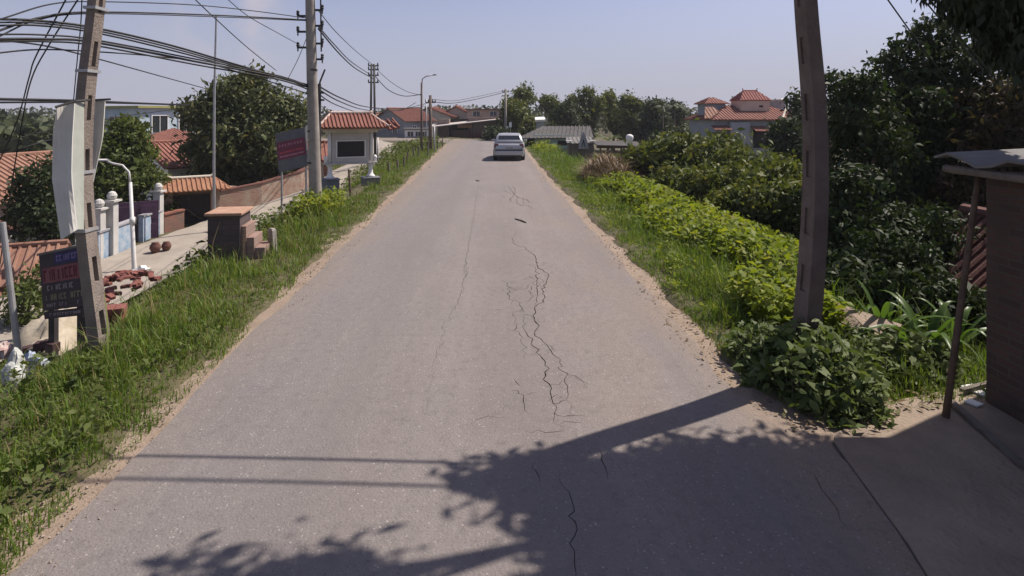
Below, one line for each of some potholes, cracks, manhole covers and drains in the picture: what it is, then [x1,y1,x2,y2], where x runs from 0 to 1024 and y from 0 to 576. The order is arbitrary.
crack [427,196,477,407]
crack [502,230,588,433]
crack [559,475,578,573]
